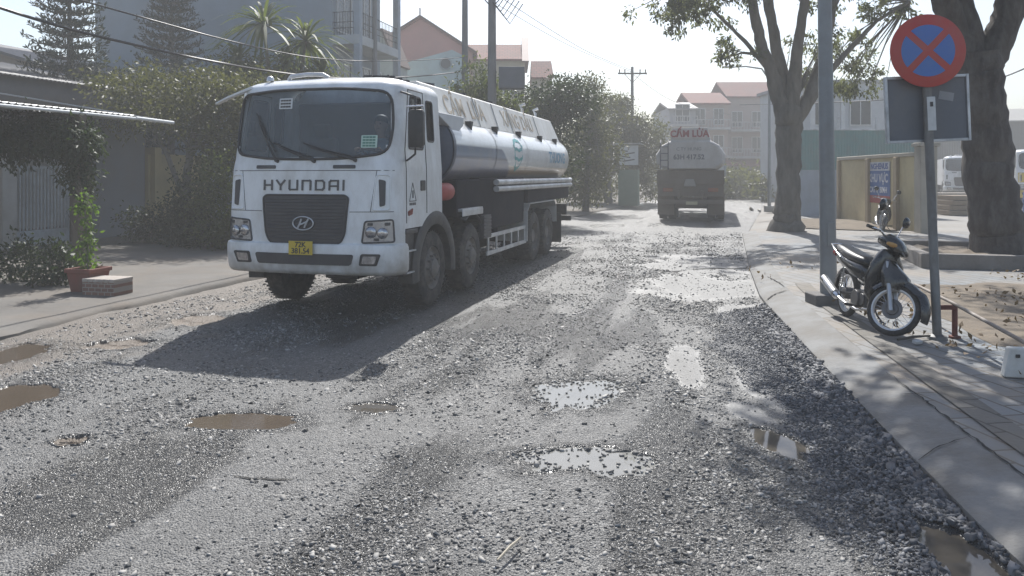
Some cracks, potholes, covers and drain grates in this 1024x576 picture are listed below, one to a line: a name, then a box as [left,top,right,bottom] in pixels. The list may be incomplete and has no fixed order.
pothole [0,381,70,415]
pothole [742,423,817,464]
pothole [495,443,674,482]
pothole [47,433,93,448]
pothole [171,410,310,431]
pothole [0,341,59,365]
pothole [908,516,1010,576]
pothole [342,401,407,414]
pothole [524,376,635,415]
